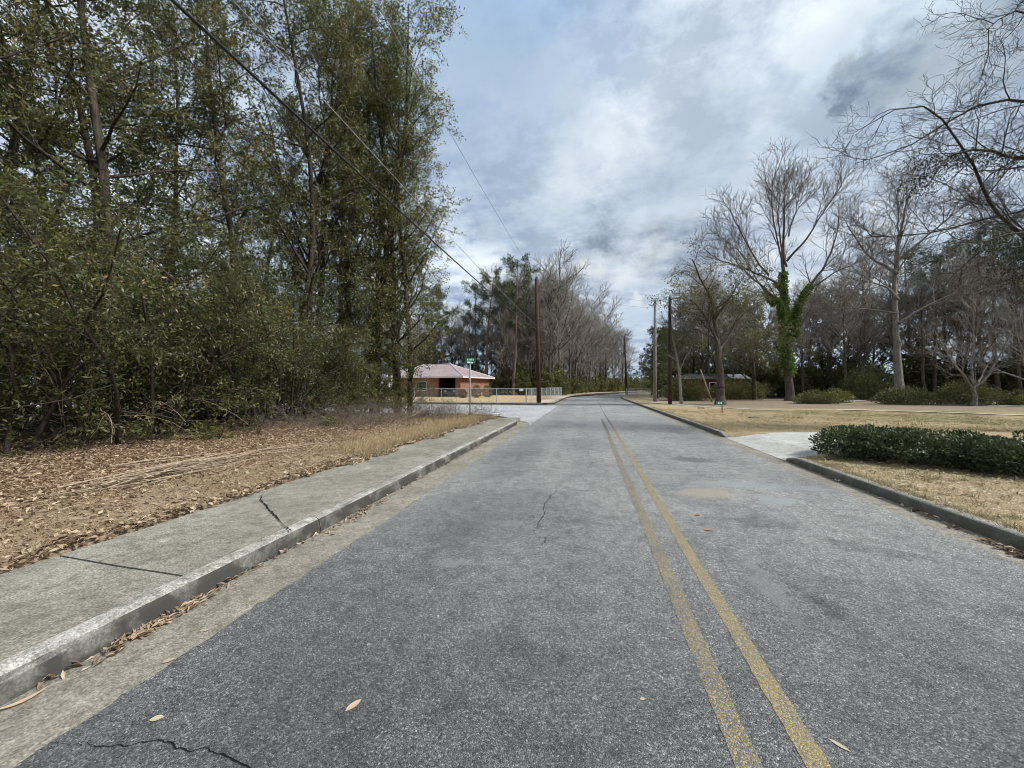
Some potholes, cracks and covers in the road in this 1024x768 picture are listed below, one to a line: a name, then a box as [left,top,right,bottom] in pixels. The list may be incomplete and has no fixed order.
crack [56,739,251,768]
